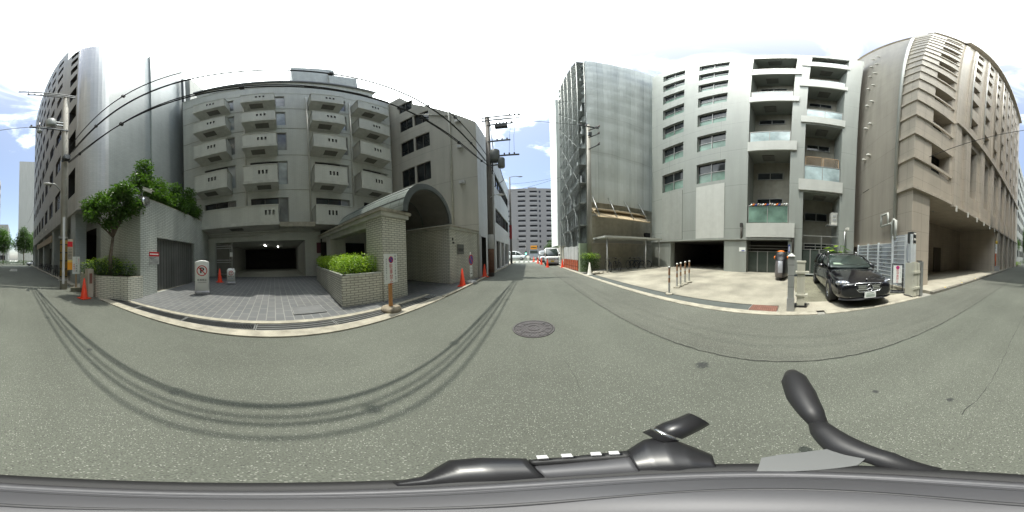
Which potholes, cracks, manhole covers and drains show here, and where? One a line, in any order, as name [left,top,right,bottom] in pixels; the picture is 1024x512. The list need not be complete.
drain grate [333,310,387,325]
utility cover [292,305,327,315]
drain grate [182,317,256,330]
drain grate [255,320,337,330]
manhole cover [513,320,555,338]
drain grate [135,306,187,321]
